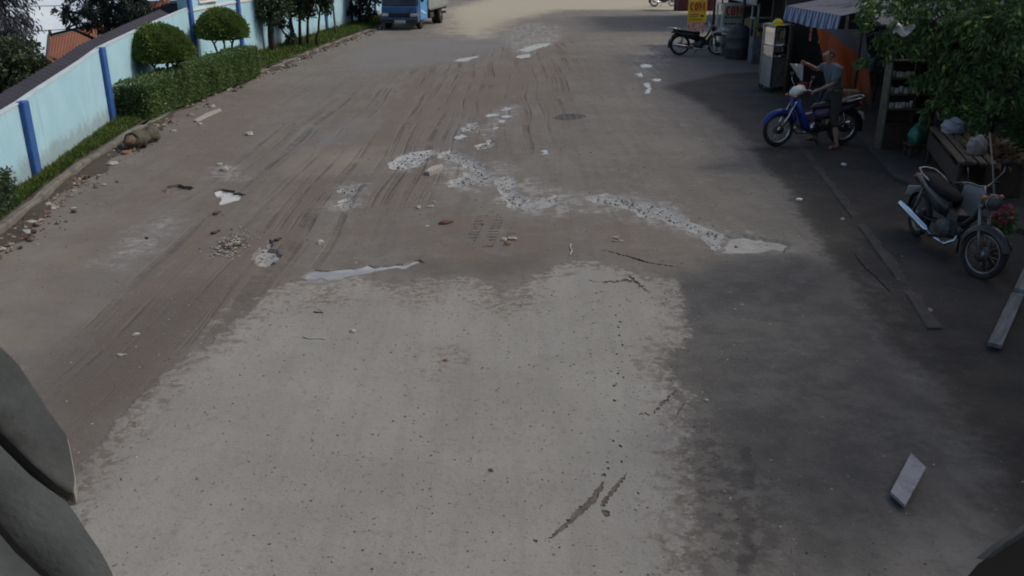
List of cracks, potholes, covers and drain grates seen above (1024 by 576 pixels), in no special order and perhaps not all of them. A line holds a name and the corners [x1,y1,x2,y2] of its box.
crack [638,390,686,416]
pothole [494,176,563,210]
pothole [585,193,725,251]
pothole [436,150,494,187]
pothole [161,184,193,193]
crack [589,249,674,293]
pothole [214,189,247,207]
pothole [334,198,356,208]
crack [854,254,892,294]
crack [533,440,627,543]
pothole [251,239,283,267]
pothole [388,150,436,170]
